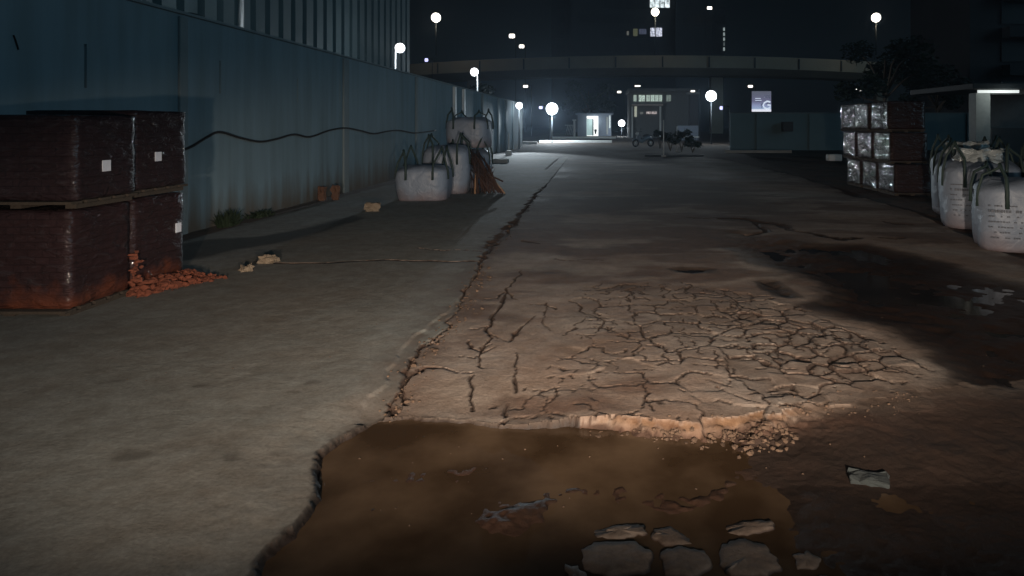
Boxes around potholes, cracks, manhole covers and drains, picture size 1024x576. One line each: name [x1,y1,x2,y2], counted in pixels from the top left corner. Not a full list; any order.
crack [387,189,568,417]
pothole [255,379,1024,576]
crack [717,218,862,240]
pothole [666,266,717,274]
crack [586,292,909,392]
